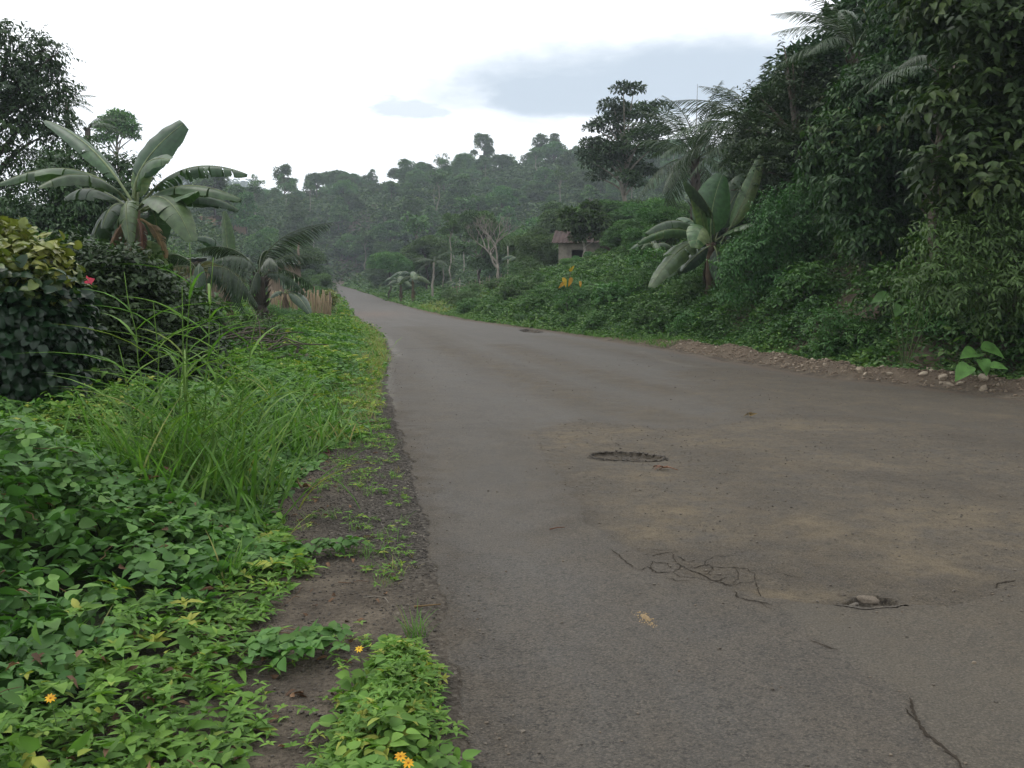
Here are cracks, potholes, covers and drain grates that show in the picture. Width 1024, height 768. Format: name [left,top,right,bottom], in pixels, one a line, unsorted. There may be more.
pothole [588,451,663,462]
crack [611,549,803,610]
crack [905,698,962,768]
pothole [836,593,906,610]
